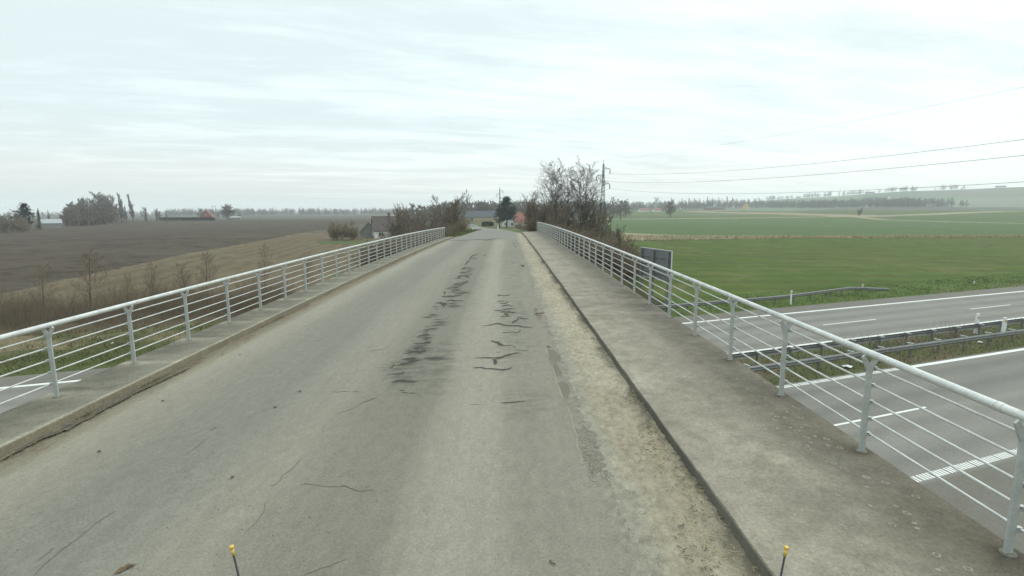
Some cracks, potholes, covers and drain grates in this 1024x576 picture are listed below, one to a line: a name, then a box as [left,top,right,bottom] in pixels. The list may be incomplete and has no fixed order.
crack [34,512,113,575]
crack [471,289,549,373]
crack [332,238,496,413]
crack [274,461,376,491]
